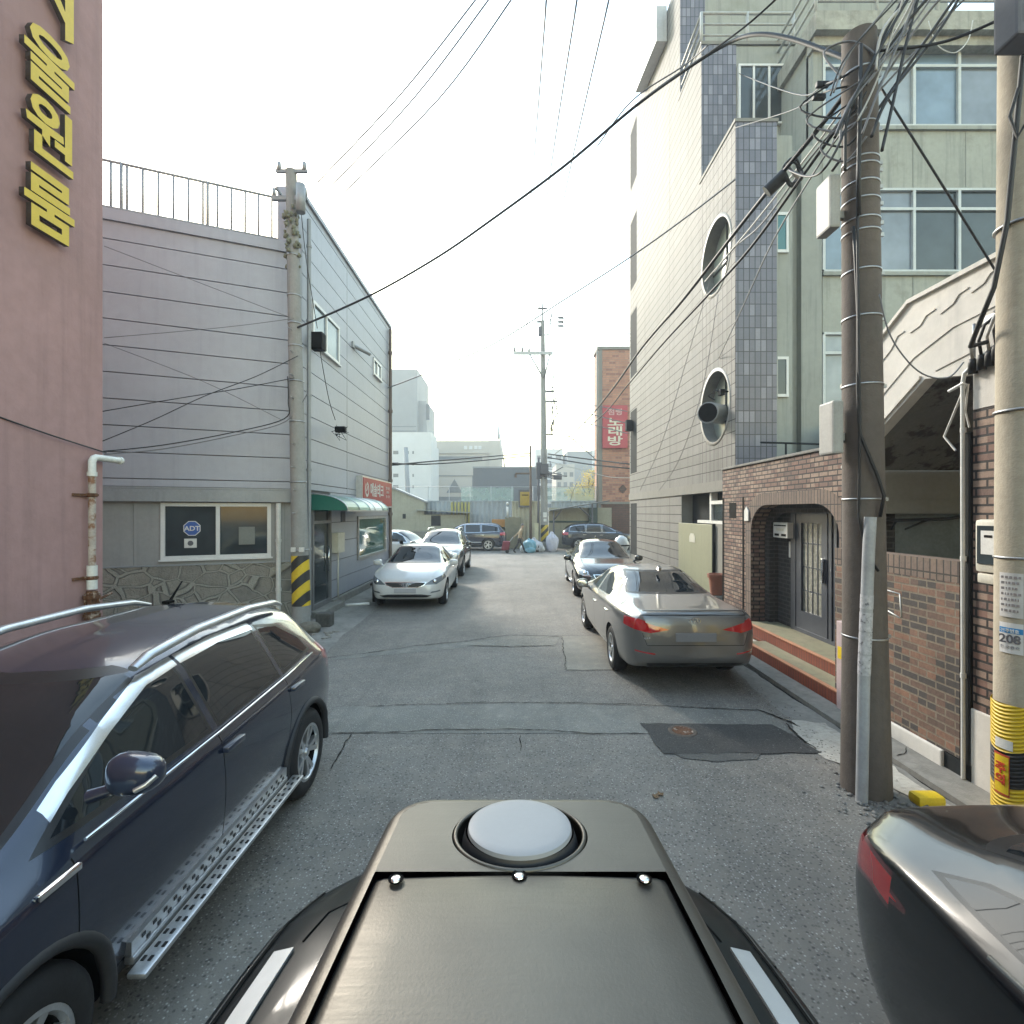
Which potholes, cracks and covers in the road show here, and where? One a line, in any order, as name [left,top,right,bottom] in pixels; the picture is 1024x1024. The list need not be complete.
manhole cover [668,725,698,737]
crack [328,635,543,658]
crack [331,728,645,768]
crack [367,702,816,748]
